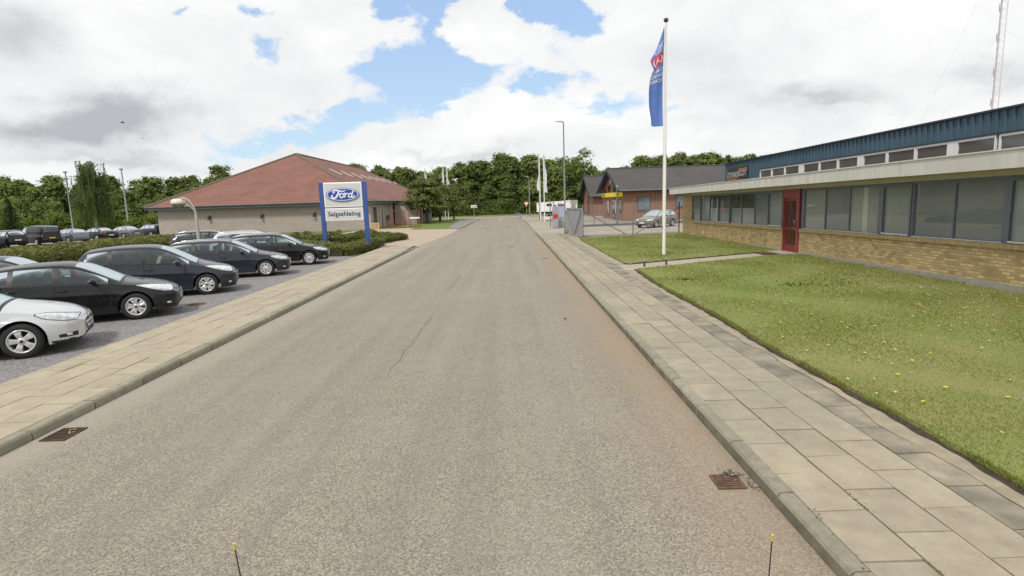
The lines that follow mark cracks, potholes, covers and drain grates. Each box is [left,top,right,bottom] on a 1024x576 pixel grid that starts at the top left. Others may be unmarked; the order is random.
drain grate [709,474,748,490]
drain grate [39,427,88,442]
